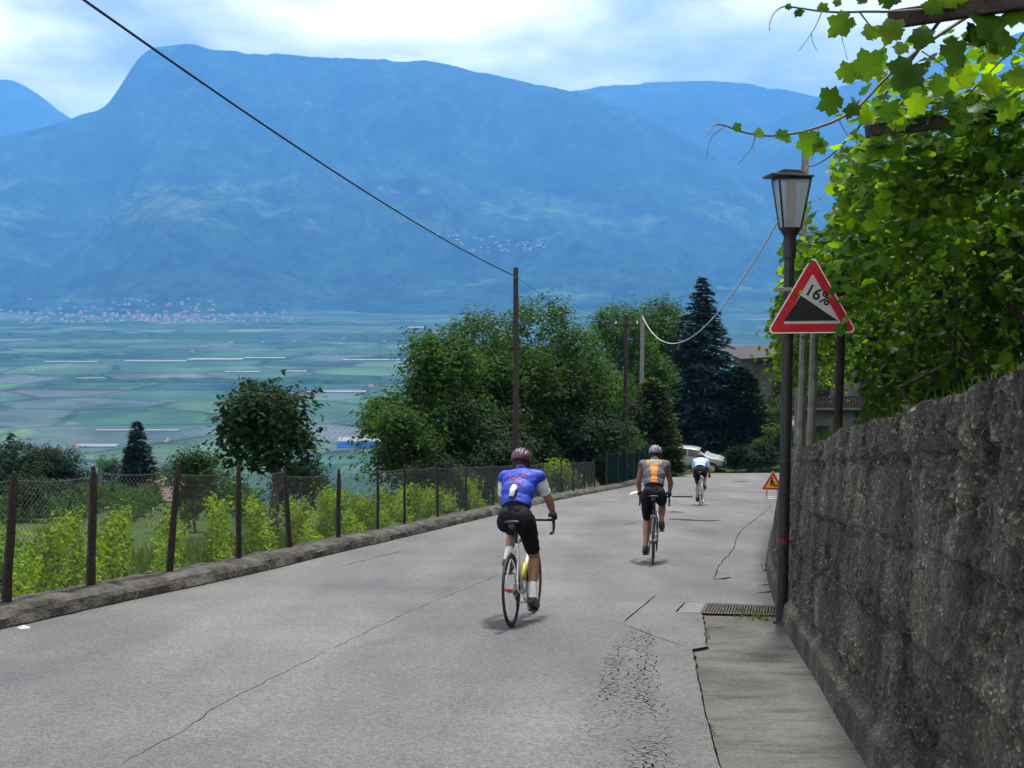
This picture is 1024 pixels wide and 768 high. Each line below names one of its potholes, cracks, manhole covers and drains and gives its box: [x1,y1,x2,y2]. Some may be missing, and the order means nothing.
crack [120,573,502,766]
crack [569,595,688,768]
drain grate [701,603,776,620]
crack [713,505,772,580]
